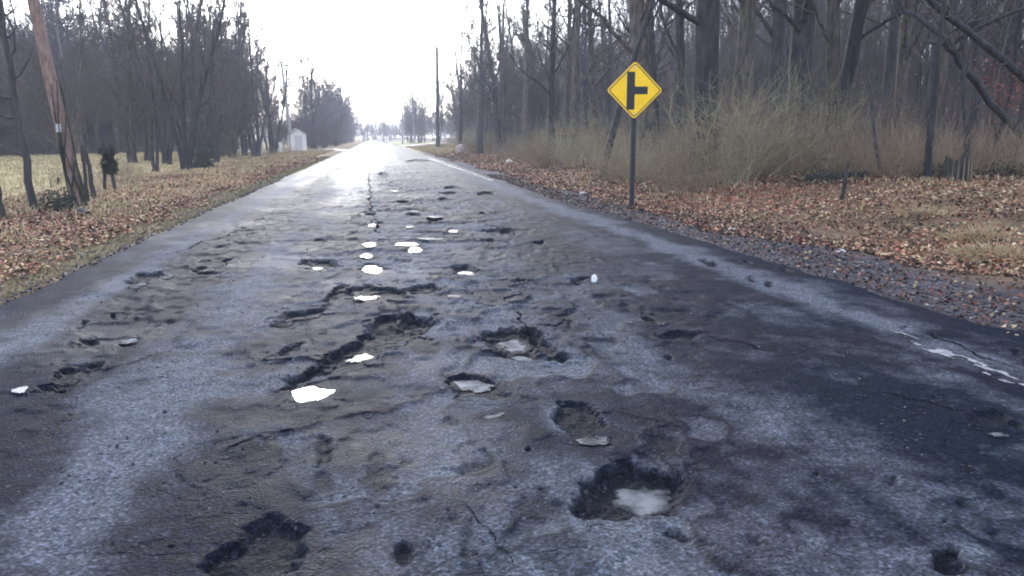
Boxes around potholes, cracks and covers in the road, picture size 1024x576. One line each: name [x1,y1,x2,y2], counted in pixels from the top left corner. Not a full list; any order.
pothole [343,282,416,305]
pothole [560,452,701,528]
pothole [434,371,531,405]
pothole [291,256,345,271]
pothole [34,356,116,399]
pothole [529,325,589,366]
pothole [269,310,449,395]
pothole [465,321,554,364]
crack [925,332,1015,367]
pothole [537,397,623,445]
